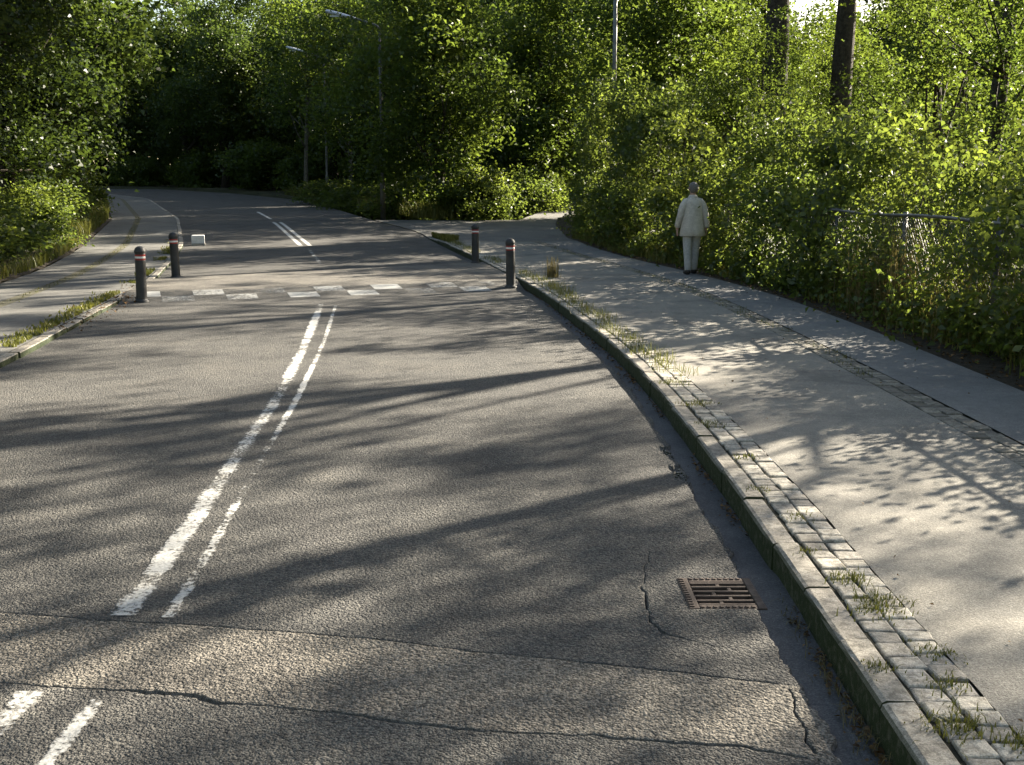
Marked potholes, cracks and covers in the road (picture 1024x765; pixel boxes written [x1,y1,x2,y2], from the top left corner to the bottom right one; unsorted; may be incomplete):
crack [632,550,722,650]
drain grate [677,578,768,610]
